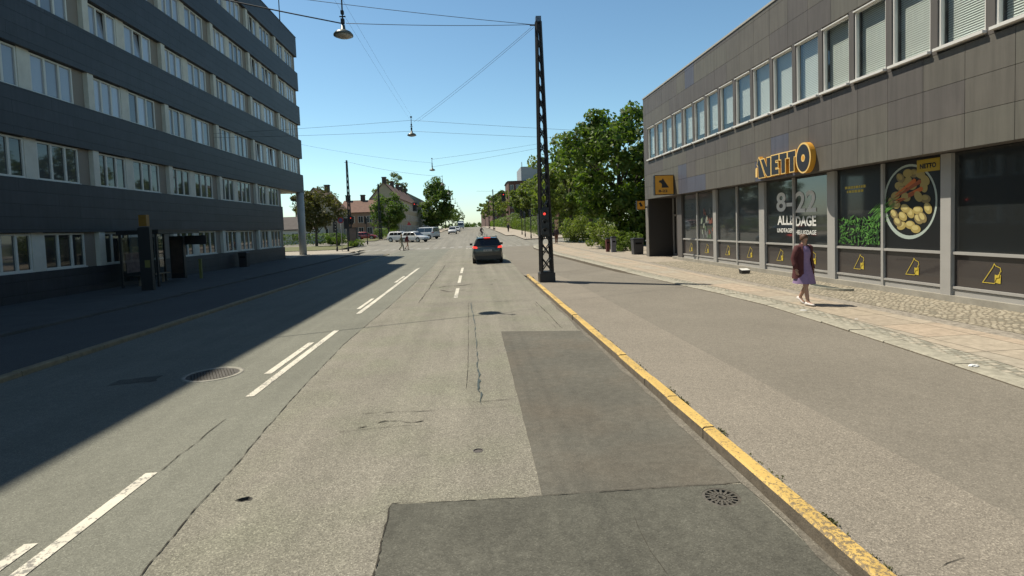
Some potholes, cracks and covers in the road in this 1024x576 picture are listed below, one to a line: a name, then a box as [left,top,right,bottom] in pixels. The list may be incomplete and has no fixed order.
drain grate [702,488,741,507]
manhole cover [180,367,244,383]
crack [341,267,515,432]
